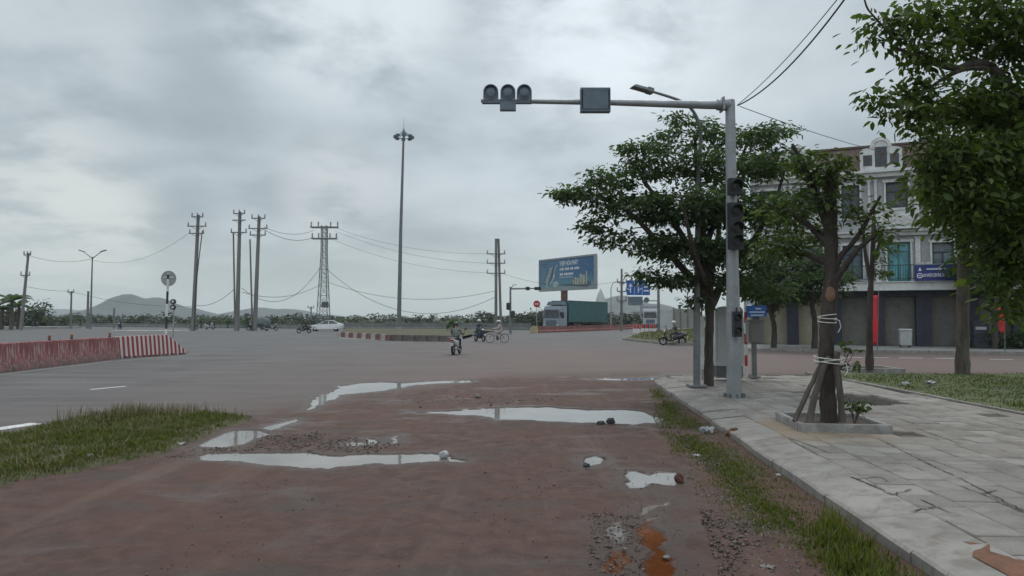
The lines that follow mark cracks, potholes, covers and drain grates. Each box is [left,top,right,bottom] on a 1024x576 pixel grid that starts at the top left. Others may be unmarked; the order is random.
pothole [199,429,271,448]
crack [886,442,1024,512]
pothole [413,406,666,425]
crack [850,476,948,512]
pothole [306,380,473,411]
pothole [195,451,468,469]
pothole [583,455,607,466]
pothole [603,521,630,545]
pothole [623,470,679,488]
pothole [629,518,678,576]
pothole [597,547,636,576]
